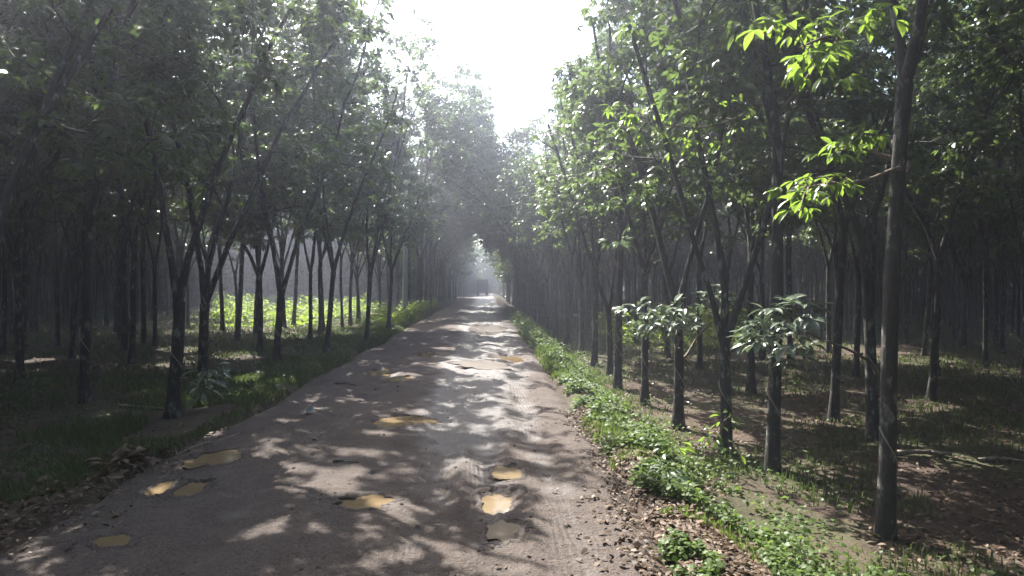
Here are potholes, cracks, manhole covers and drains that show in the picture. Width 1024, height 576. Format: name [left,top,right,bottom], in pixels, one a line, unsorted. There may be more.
pothole [171,445,253,474]
pothole [378,374,424,384]
pothole [164,475,225,499]
pothole [134,476,190,499]
pothole [439,358,524,373]
pothole [358,412,450,432]
pothole [409,350,445,358]
pothole [85,529,149,551]
pothole [472,482,528,520]
pothole [481,352,537,365]
pothole [485,461,529,484]
pothole [318,491,405,512]
